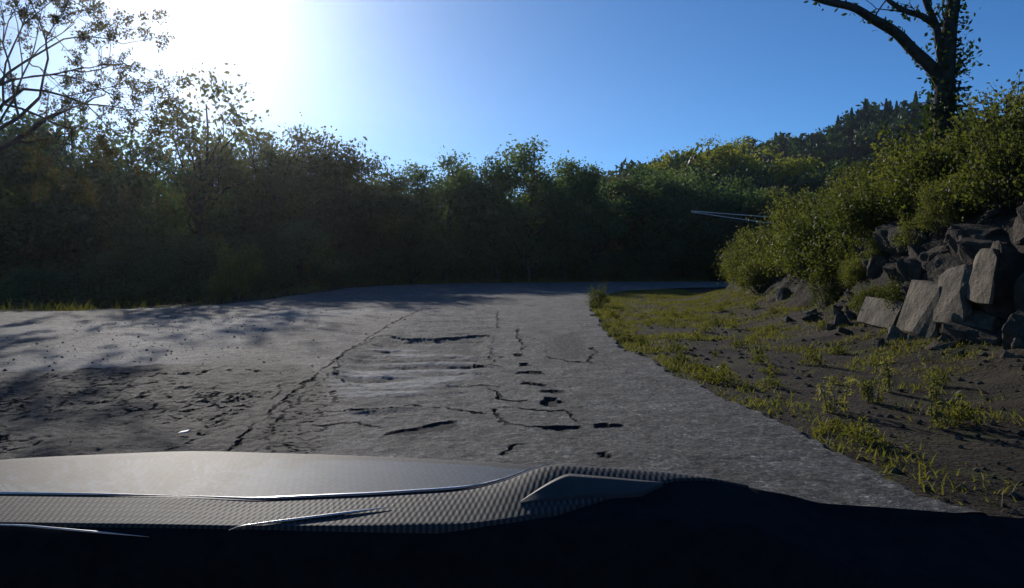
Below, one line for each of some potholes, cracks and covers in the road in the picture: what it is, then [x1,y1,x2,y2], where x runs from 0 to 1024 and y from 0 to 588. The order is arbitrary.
crack [252,309,579,456]
pothole [331,334,497,387]
crack [0,367,272,454]
crack [545,347,599,363]
pothole [539,396,565,407]
pothole [383,420,458,436]
